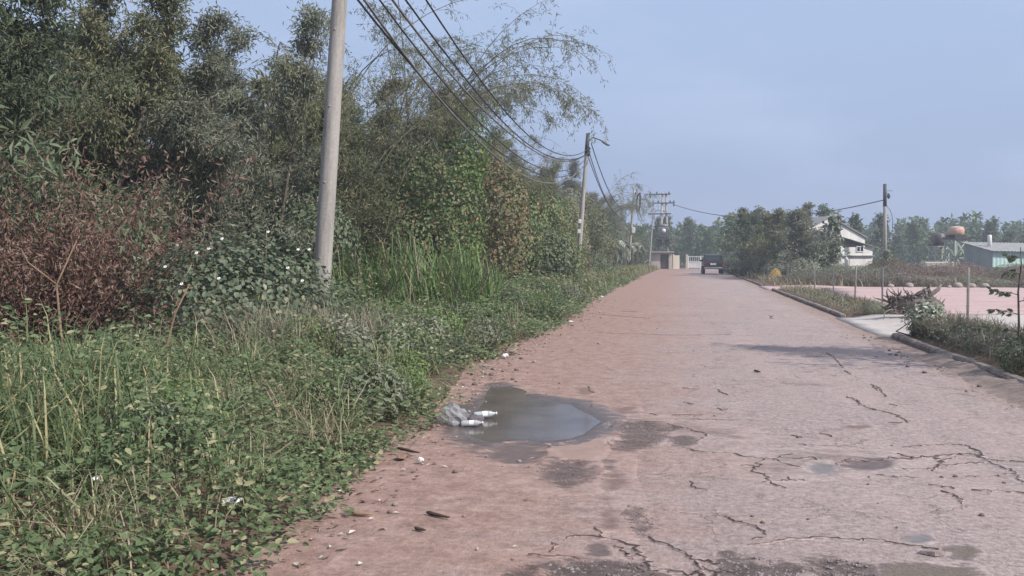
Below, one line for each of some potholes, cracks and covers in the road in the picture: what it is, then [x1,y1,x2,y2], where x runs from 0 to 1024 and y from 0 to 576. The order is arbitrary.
crack [724,516,939,550]
crack [836,444,1024,504]
pothole [432,382,629,449]
crack [528,527,740,576]
crack [645,384,908,490]
